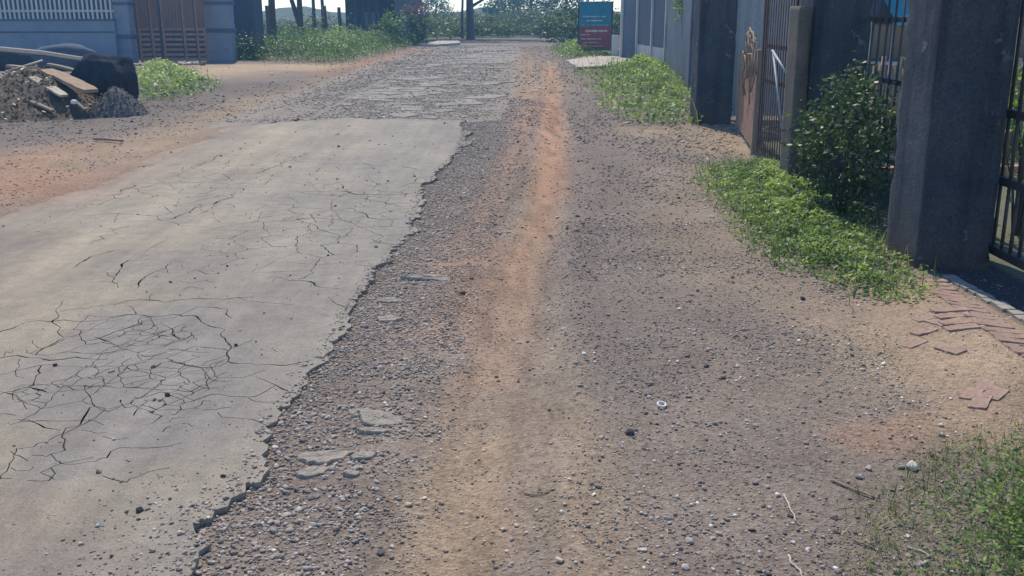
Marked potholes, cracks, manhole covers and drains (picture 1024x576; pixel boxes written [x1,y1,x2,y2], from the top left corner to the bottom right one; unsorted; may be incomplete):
crack [76,142,312,290]
crack [0,295,311,483]
crack [201,163,420,316]
